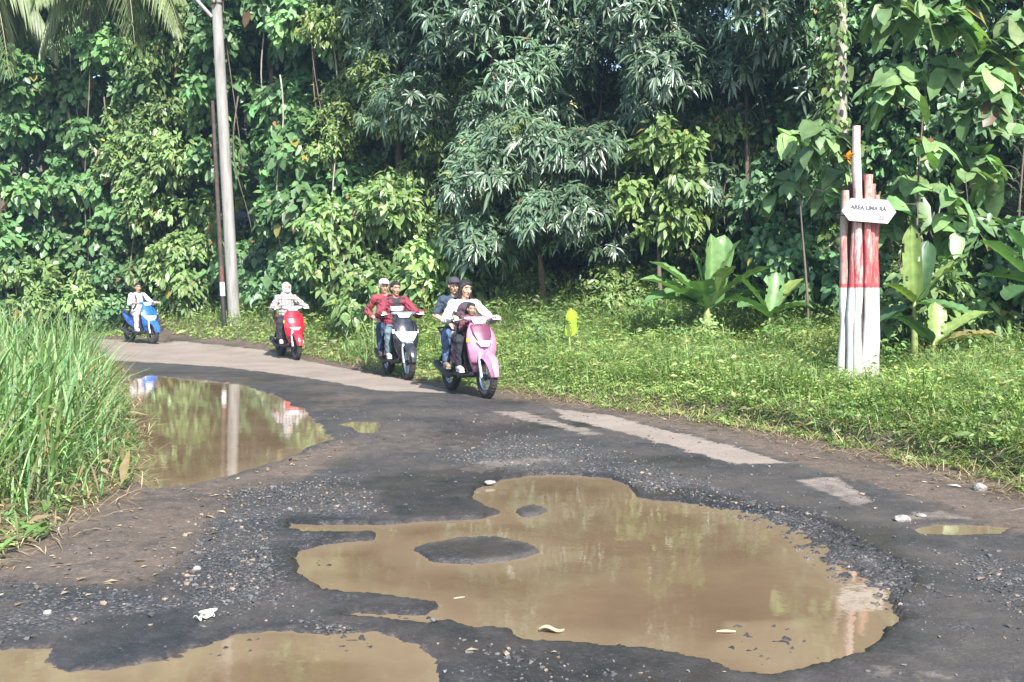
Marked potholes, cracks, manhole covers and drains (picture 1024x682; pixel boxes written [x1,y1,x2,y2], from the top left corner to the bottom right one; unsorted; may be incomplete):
pothole [335,420,385,433]
pothole [277,470,926,677]
pothole [909,522,1017,536]
pothole [84,373,343,489]
pothole [0,623,456,682]
